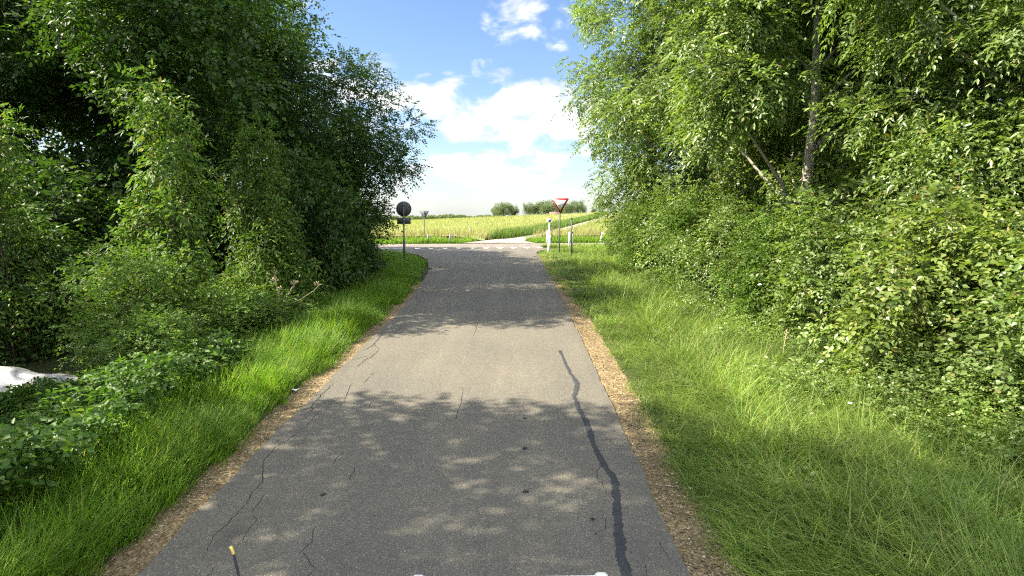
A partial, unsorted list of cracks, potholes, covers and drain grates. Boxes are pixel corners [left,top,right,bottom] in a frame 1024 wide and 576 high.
crack [198,327,402,560]
